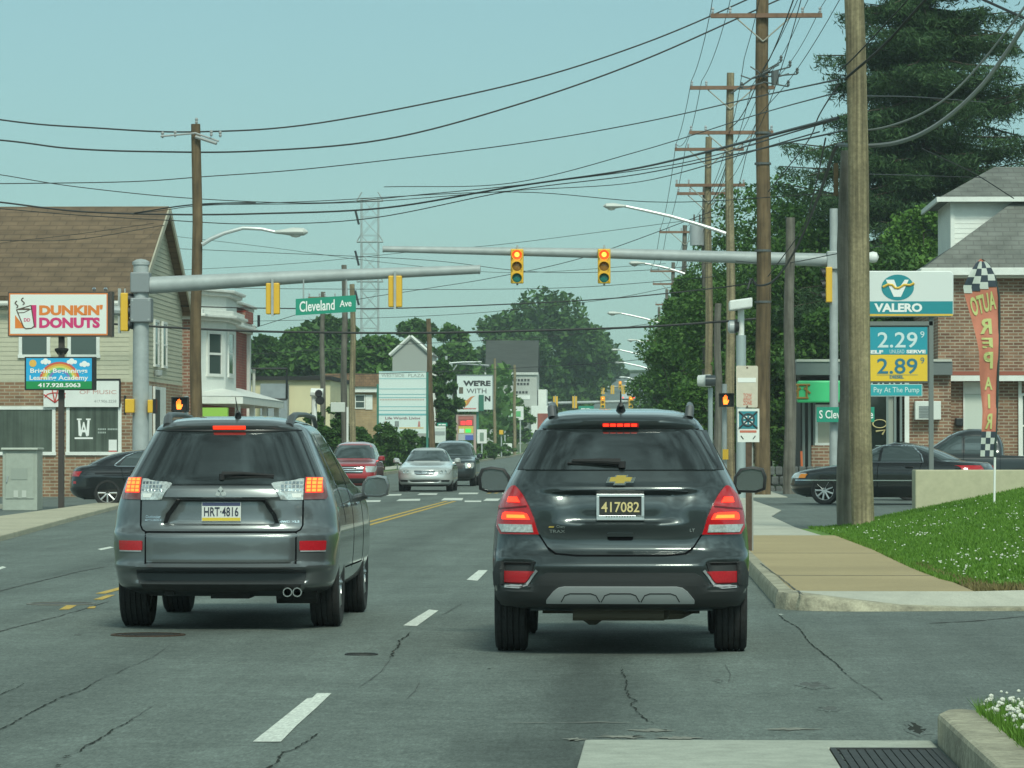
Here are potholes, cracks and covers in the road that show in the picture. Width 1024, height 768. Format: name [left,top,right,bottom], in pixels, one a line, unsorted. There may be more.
crack [621,667,648,721]
crack [0,648,165,729]
drain grate [830,747,957,768]
crack [80,703,160,751]
crack [778,614,883,700]
